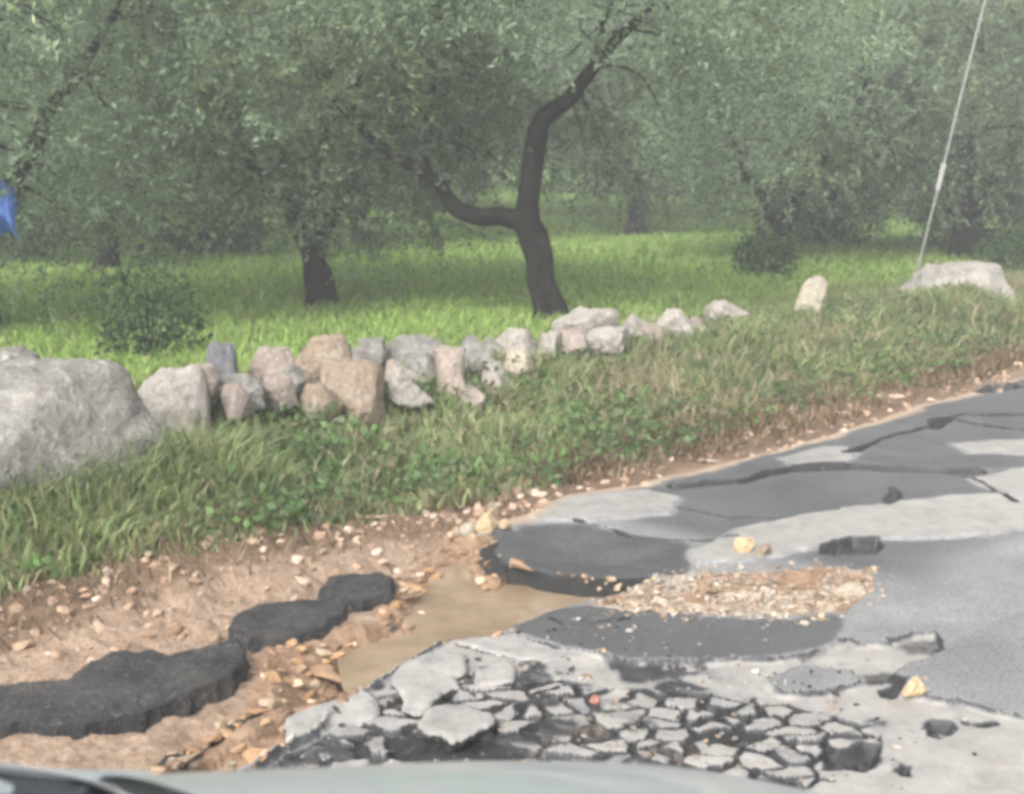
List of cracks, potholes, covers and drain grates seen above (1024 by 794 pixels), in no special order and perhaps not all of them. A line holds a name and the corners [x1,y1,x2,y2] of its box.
crack [666,413,1023,503]
pothole [589,567,873,618]
